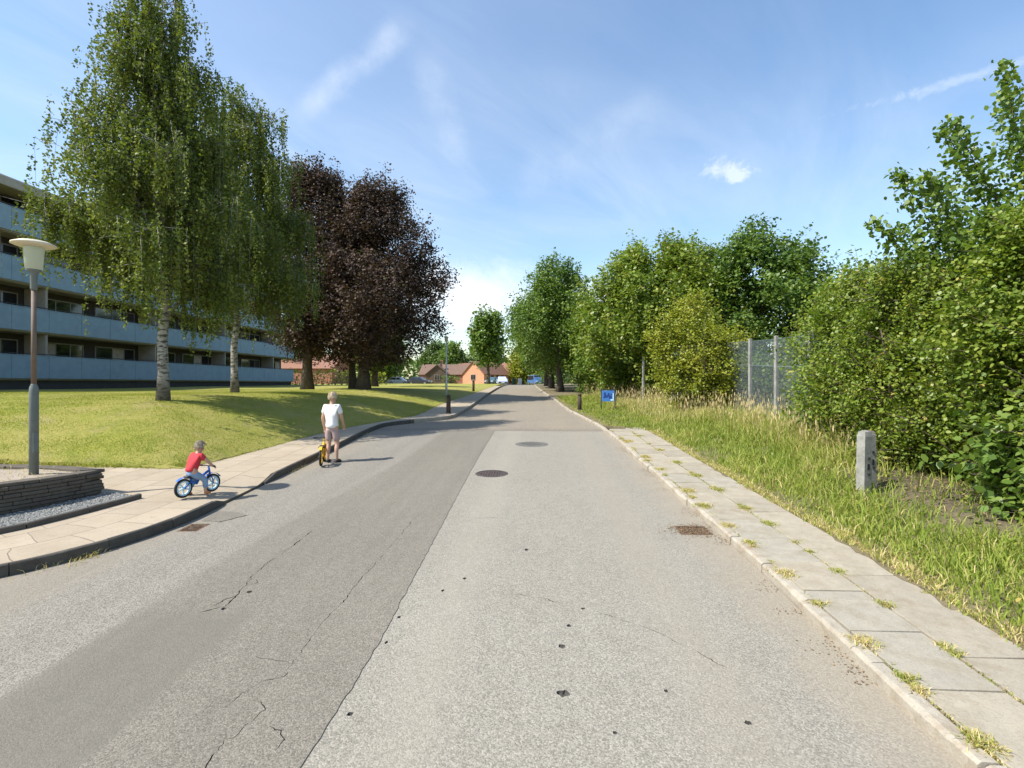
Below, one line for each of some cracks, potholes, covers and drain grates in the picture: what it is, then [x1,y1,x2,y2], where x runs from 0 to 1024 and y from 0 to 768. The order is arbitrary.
drain grate [177,524,210,532]
crack [205,515,418,768]
drain grate [674,526,712,535]
